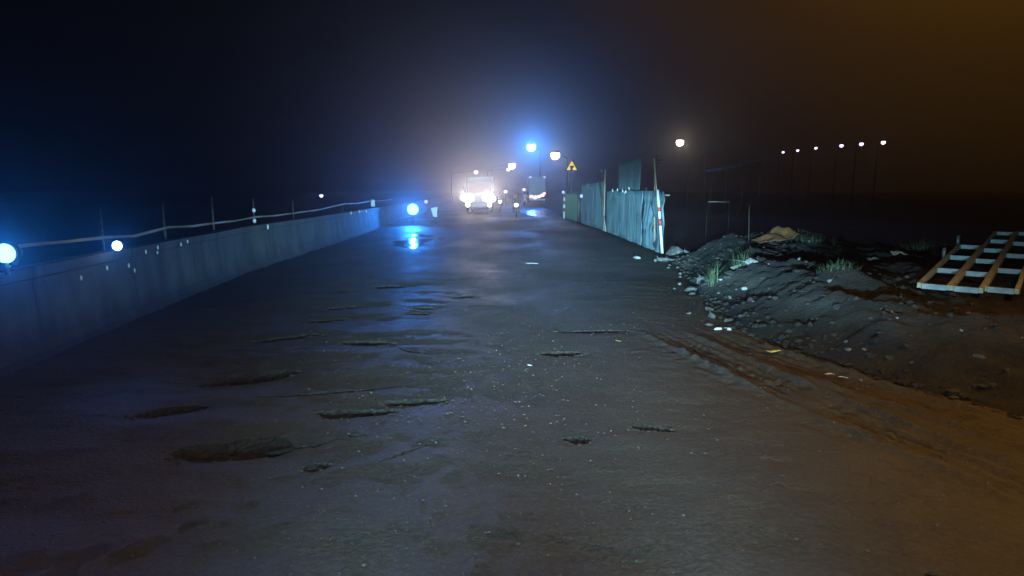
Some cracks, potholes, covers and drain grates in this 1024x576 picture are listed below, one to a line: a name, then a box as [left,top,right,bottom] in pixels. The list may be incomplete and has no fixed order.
pothole [161,435,305,464]
pothole [124,405,215,420]
crack [252,383,412,398]
pothole [243,333,328,344]
pothole [561,435,592,446]
pothole [191,368,306,389]
pothole [628,424,677,432]
pothole [312,408,398,420]
pothole [299,461,334,472]
crack [266,434,428,462]
